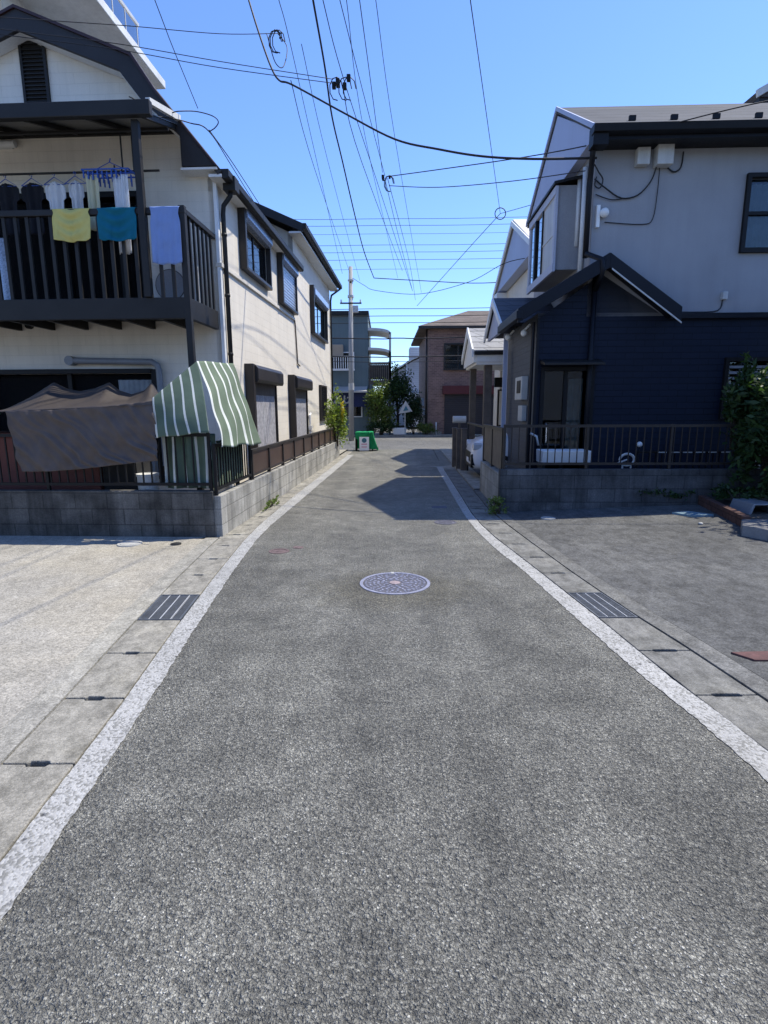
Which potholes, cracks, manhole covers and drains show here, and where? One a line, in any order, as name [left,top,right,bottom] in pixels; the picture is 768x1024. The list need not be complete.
drain grate [567,593,638,619]
drain grate [137,595,200,621]
manhole cover [360,572,430,595]
